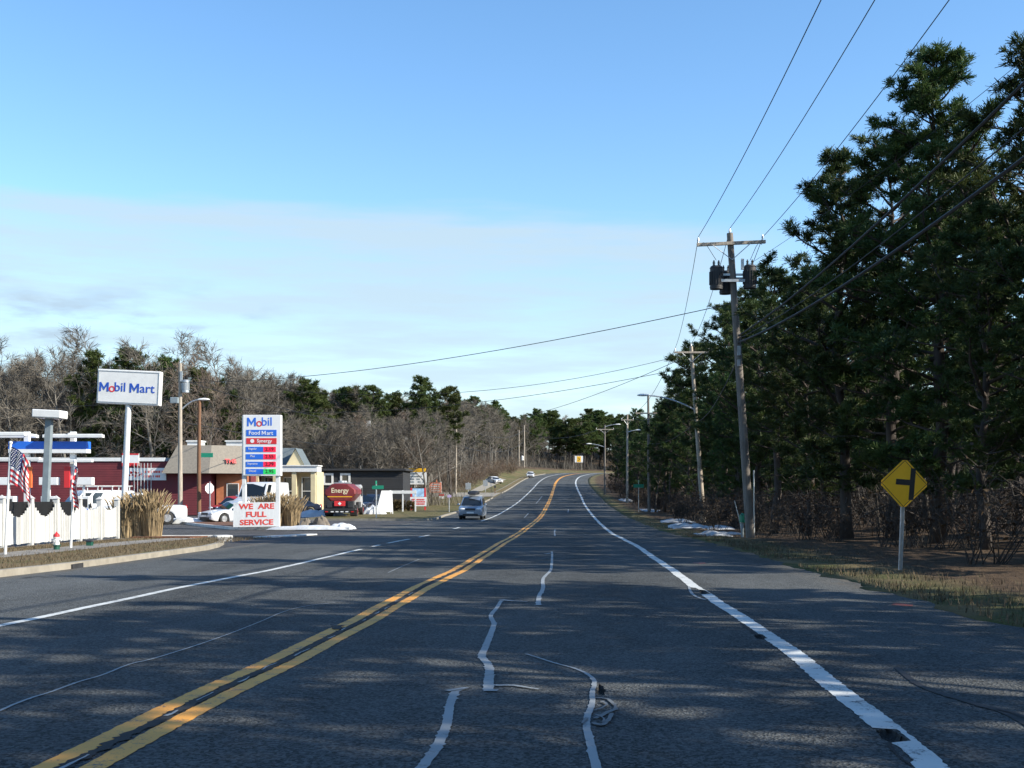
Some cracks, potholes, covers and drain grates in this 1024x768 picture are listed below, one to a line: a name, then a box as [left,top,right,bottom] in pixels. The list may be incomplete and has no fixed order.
crack [894,667,1024,724]
pothole [876,728,907,742]
